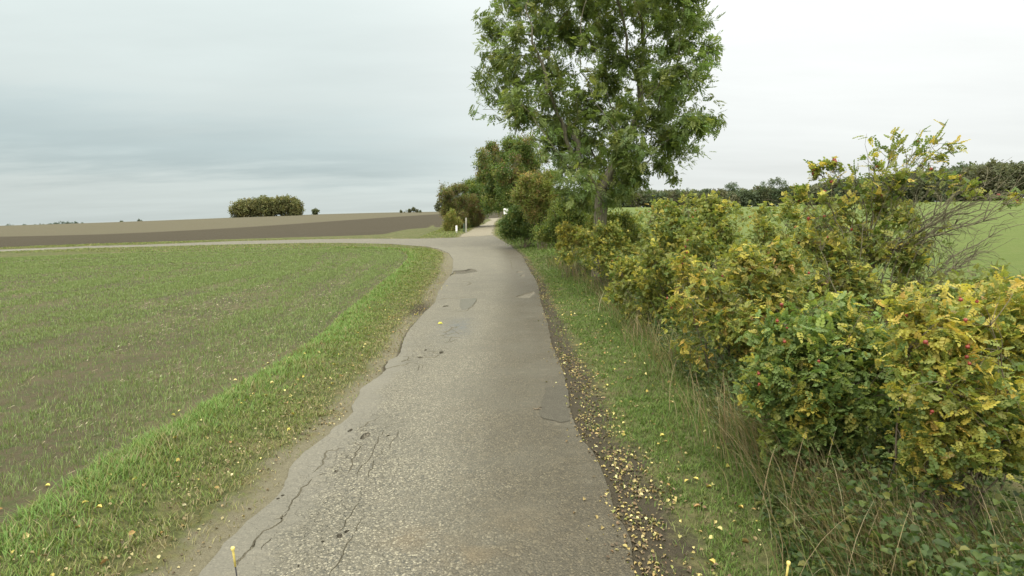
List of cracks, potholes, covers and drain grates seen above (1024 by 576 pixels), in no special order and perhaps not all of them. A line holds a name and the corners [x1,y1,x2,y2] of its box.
crack [236,417,405,574]
